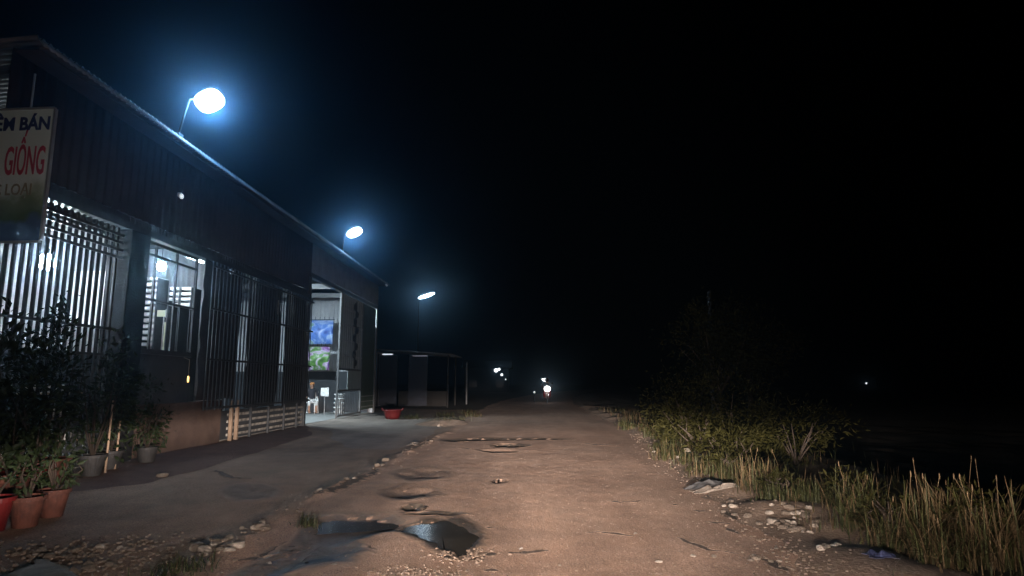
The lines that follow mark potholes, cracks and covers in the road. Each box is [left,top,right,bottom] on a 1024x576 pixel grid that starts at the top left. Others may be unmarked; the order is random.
pothole [384,465,459,482]
pothole [372,482,450,502]
pothole [391,515,493,564]
pothole [397,502,428,512]
crack [483,549,548,572]
pothole [223,511,422,576]
crack [670,503,741,554]
